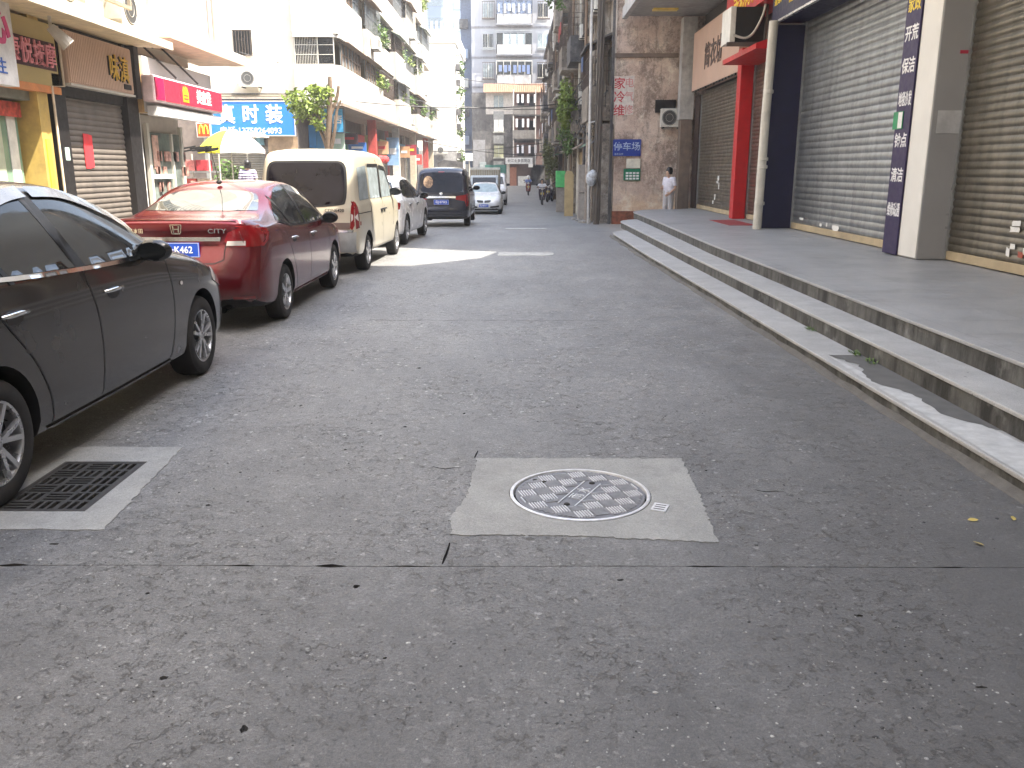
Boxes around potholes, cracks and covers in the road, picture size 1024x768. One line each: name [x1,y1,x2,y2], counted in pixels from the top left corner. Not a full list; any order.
drain grate [0,461,146,511]
manhole cover [510,469,670,522]
